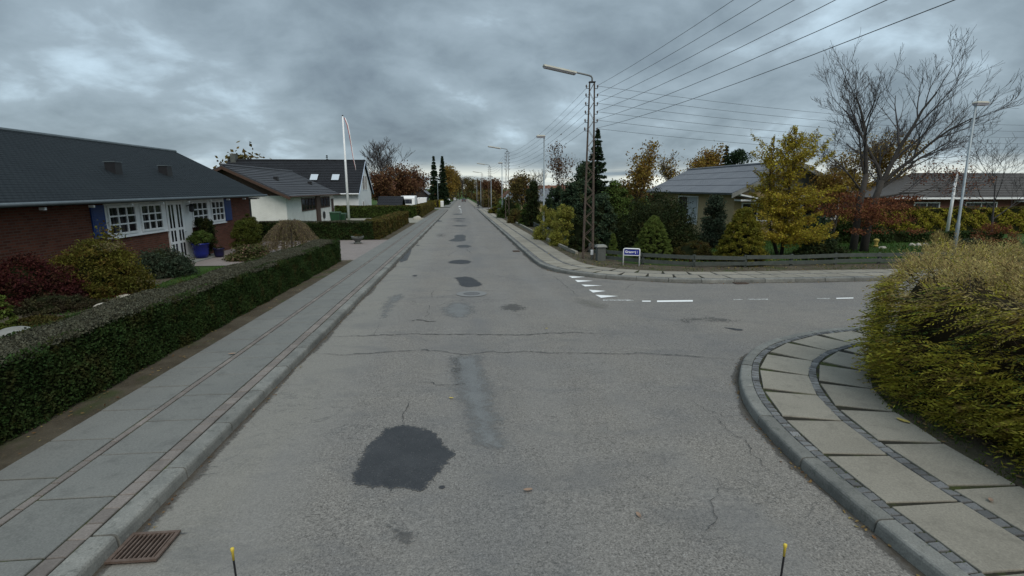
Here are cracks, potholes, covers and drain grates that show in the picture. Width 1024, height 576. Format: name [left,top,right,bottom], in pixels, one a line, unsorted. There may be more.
crack [327,293,723,359]
drain grate [104,530,181,565]
